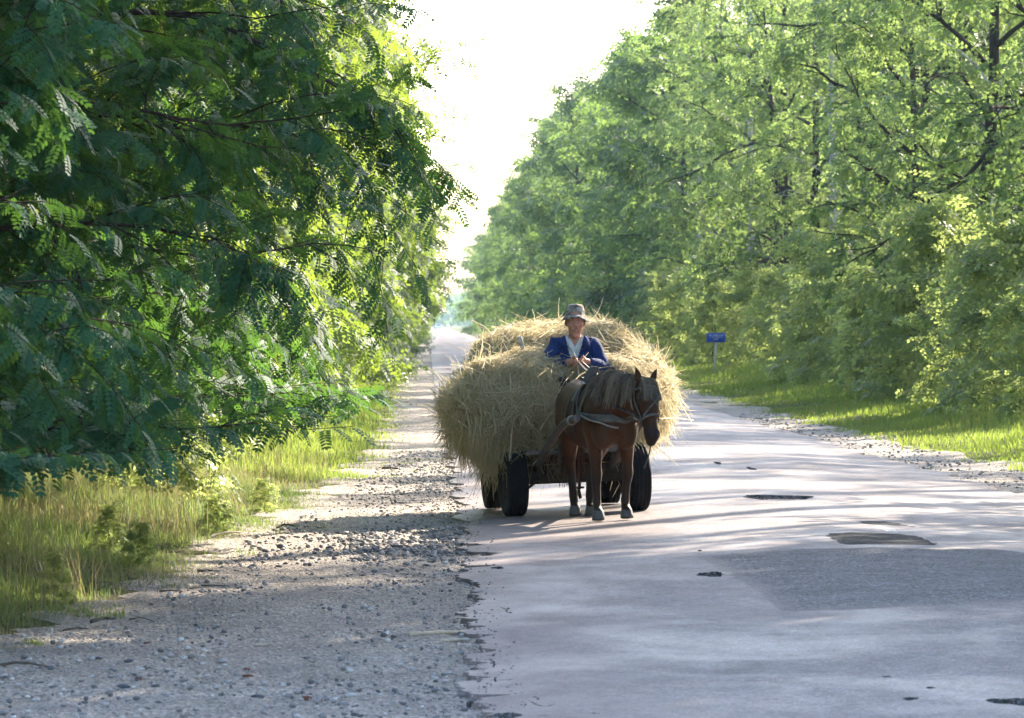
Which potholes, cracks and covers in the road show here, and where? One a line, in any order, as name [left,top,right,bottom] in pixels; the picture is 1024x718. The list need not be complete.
pothole [986,698,1024,706]
